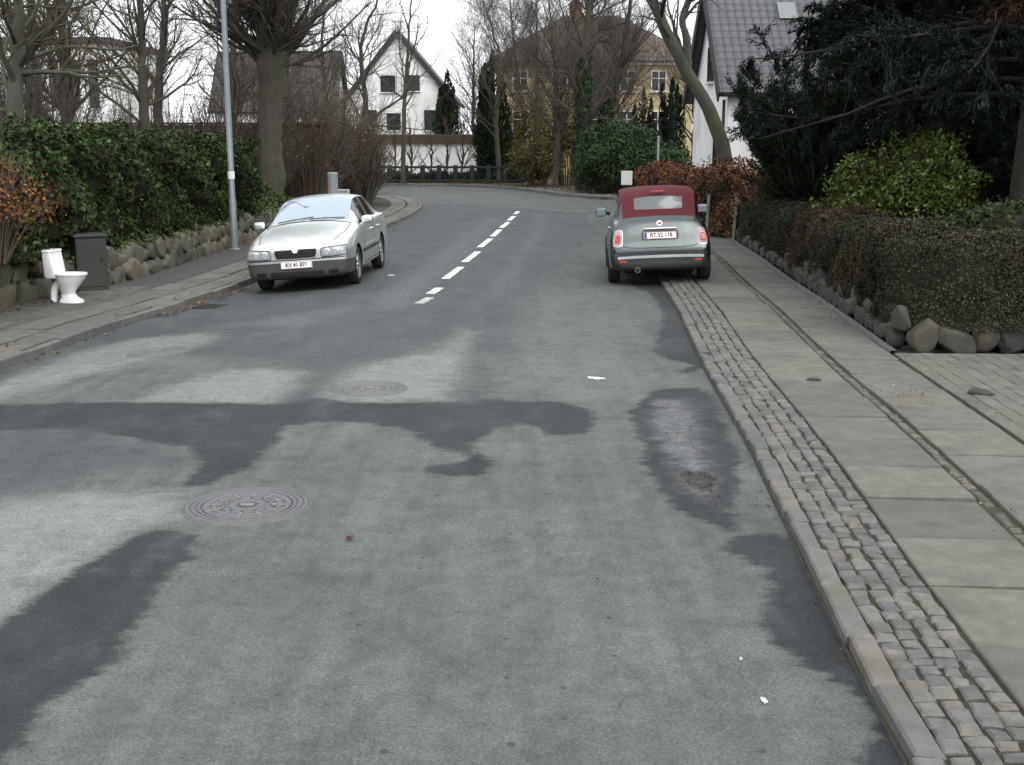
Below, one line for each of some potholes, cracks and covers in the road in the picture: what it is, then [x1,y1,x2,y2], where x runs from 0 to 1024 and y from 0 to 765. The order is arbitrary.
manhole cover [331,381,408,397]
manhole cover [181,487,312,526]
pothole [675,470,723,492]
